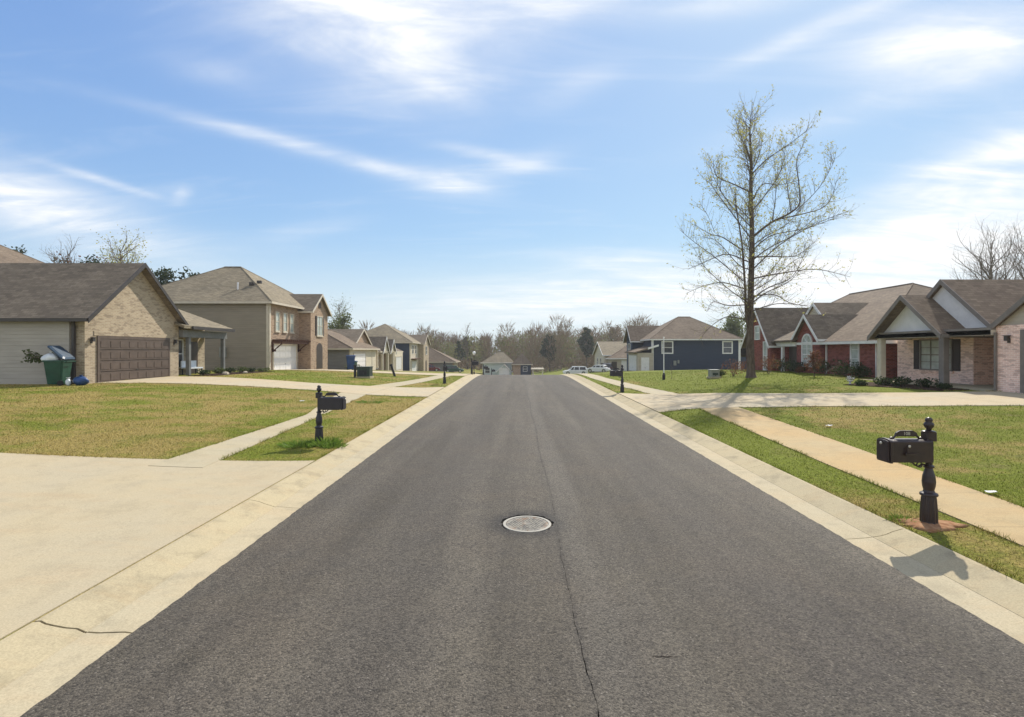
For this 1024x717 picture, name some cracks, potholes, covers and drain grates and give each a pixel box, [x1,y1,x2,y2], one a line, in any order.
manhole cover [502,516,553,533]
